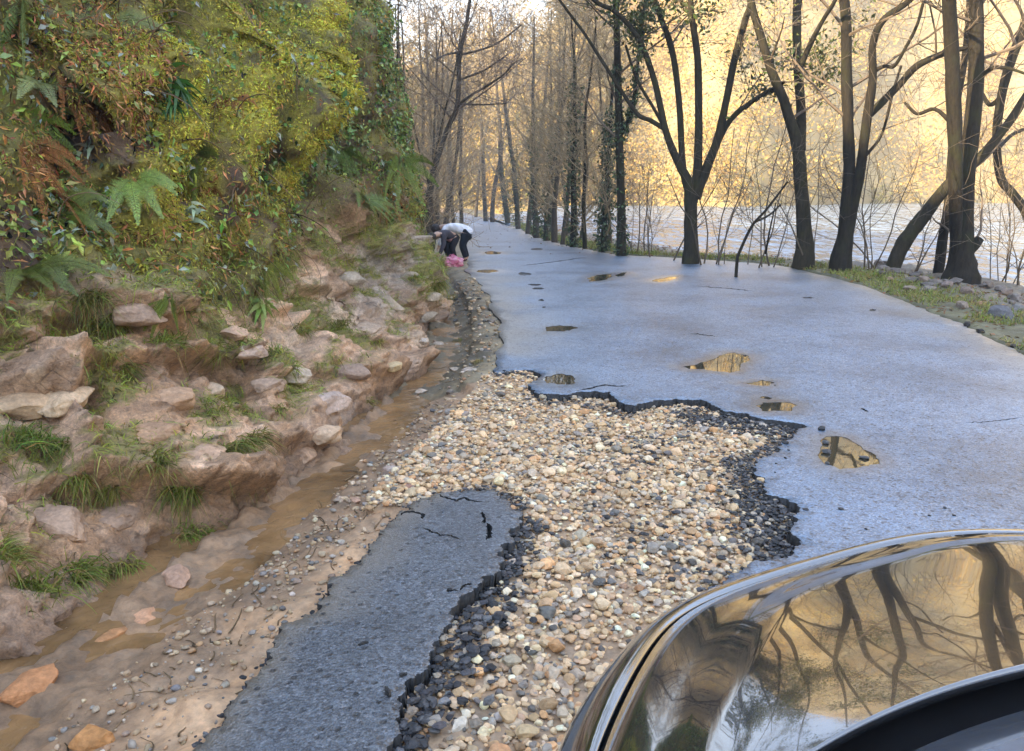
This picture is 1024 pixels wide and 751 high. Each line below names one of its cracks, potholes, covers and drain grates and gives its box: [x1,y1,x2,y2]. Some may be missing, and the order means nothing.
pothole [587,274,612,282]
pothole [683,352,750,373]
pothole [818,436,880,469]
pothole [191,370,800,751]
crack [401,494,493,540]
